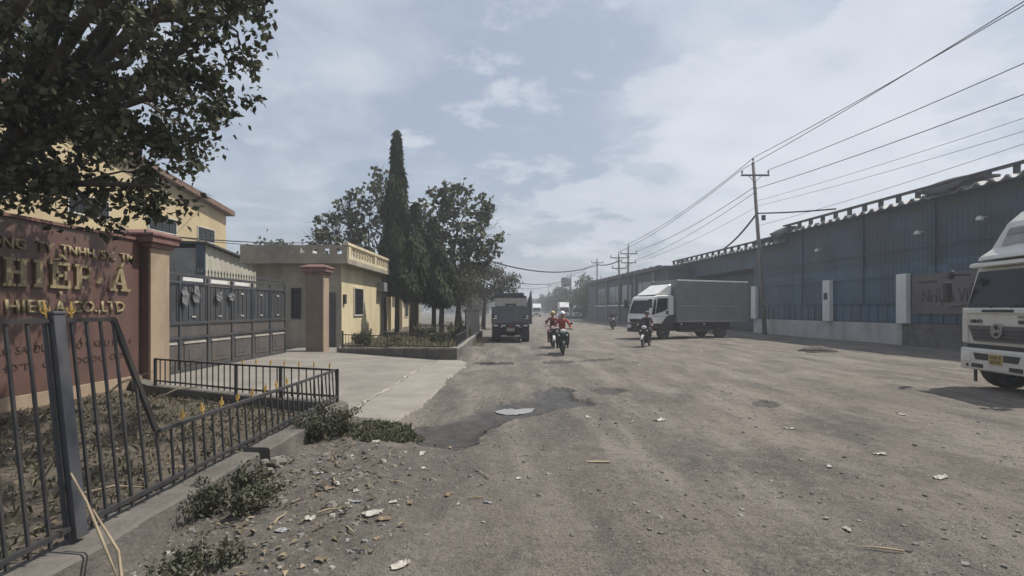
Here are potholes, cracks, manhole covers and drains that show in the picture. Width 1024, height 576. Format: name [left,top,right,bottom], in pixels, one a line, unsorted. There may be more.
pothole [752,400,779,408]
pothole [414,387,594,450]
